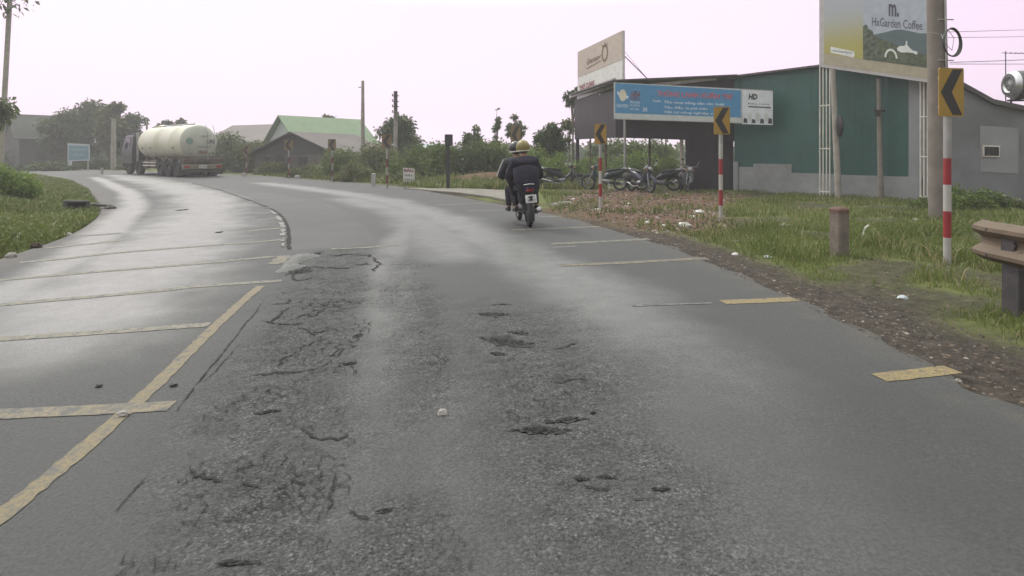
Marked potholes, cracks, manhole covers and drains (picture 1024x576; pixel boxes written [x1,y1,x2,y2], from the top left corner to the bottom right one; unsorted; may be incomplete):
pothole [545,416,587,424]
pothole [479,334,535,348]
pothole [508,424,571,435]
crack [115,254,472,576]
